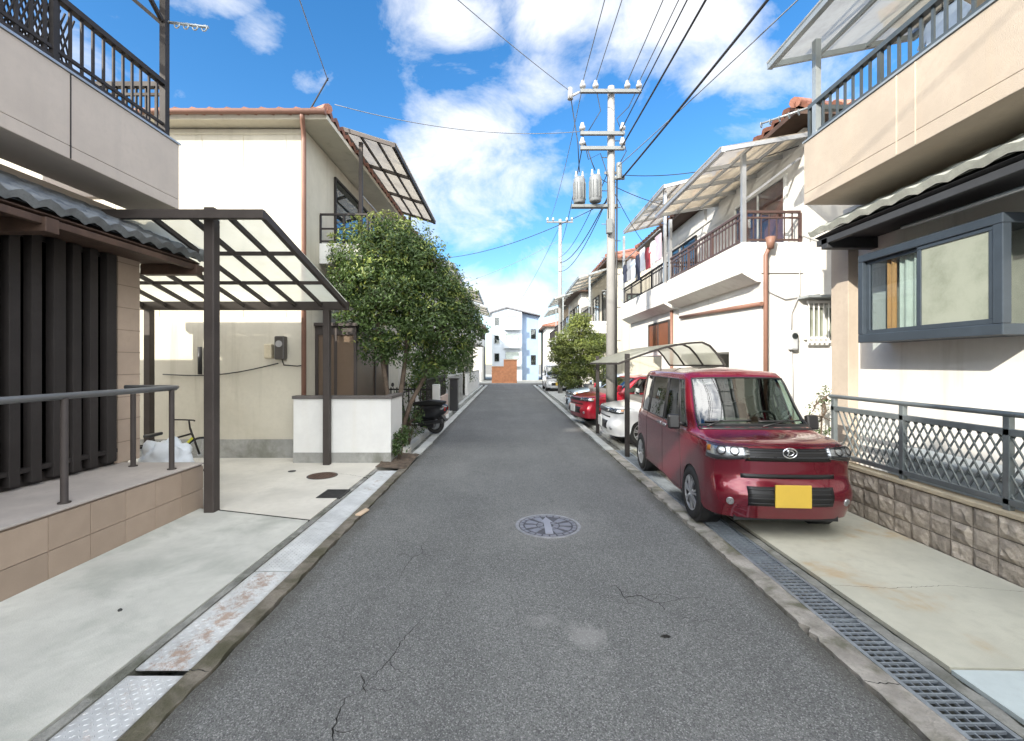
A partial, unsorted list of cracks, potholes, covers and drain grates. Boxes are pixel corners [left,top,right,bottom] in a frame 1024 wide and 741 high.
crack [331,618,423,741]
crack [597,585,714,621]
drain grate [745,556,858,619]
drain grate [703,518,772,557]
manhole cover [306,472,338,480]
manhole cover [515,514,581,539]
drain grate [821,619,1023,741]
